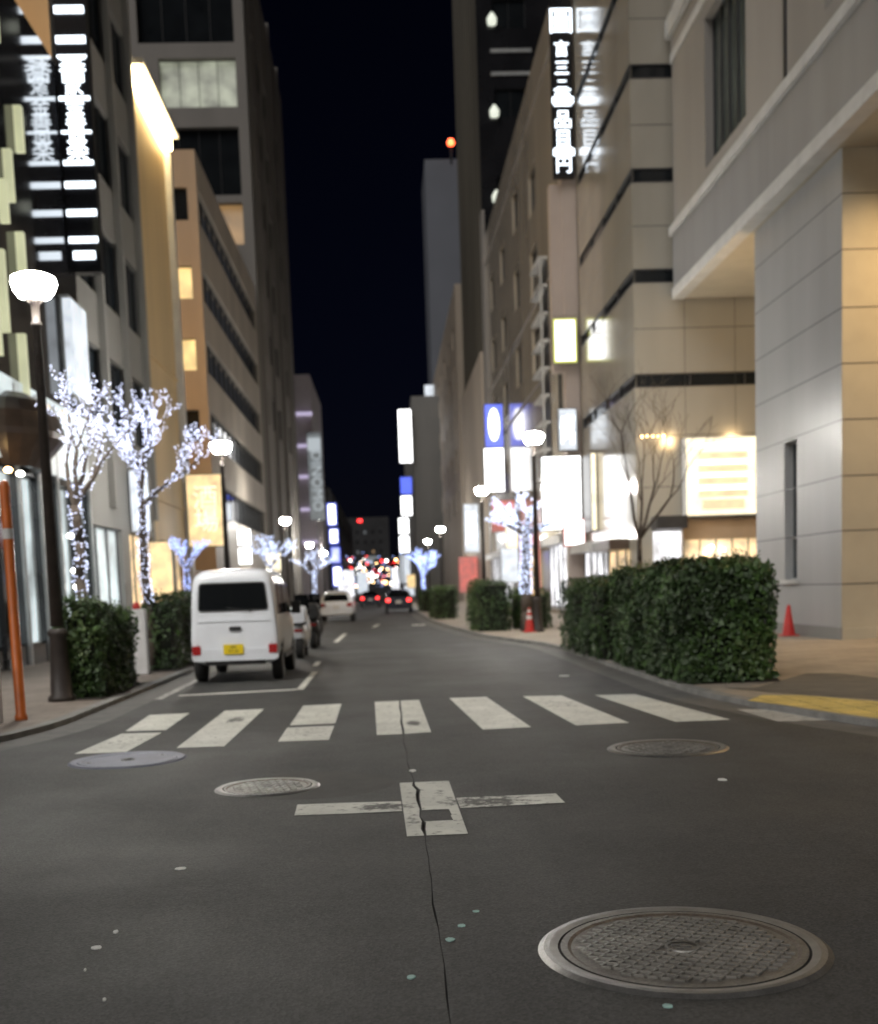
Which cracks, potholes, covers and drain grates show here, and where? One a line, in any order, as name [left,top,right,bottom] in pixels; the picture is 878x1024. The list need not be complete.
manhole cover [68,751,187,769]
crack [400,709,451,1024]
manhole cover [607,739,729,757]
manhole cover [538,906,835,1000]
manhole cover [214,777,320,797]
